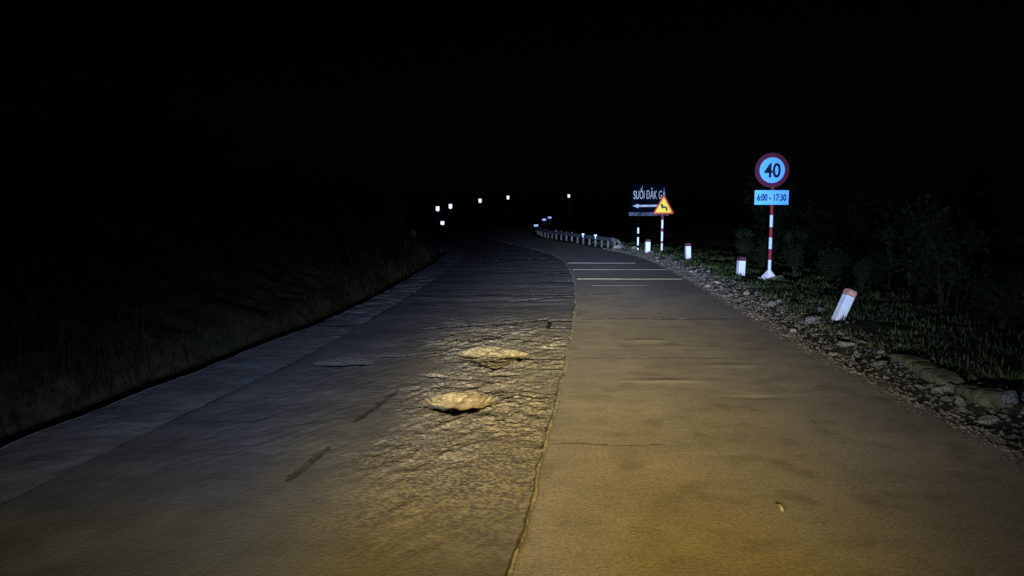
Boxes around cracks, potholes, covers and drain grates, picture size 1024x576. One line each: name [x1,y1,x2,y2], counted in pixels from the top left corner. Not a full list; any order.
pothole [422,390,494,416]
crack [285,446,332,481]
crack [353,388,400,423]
pothole [456,347,532,370]
